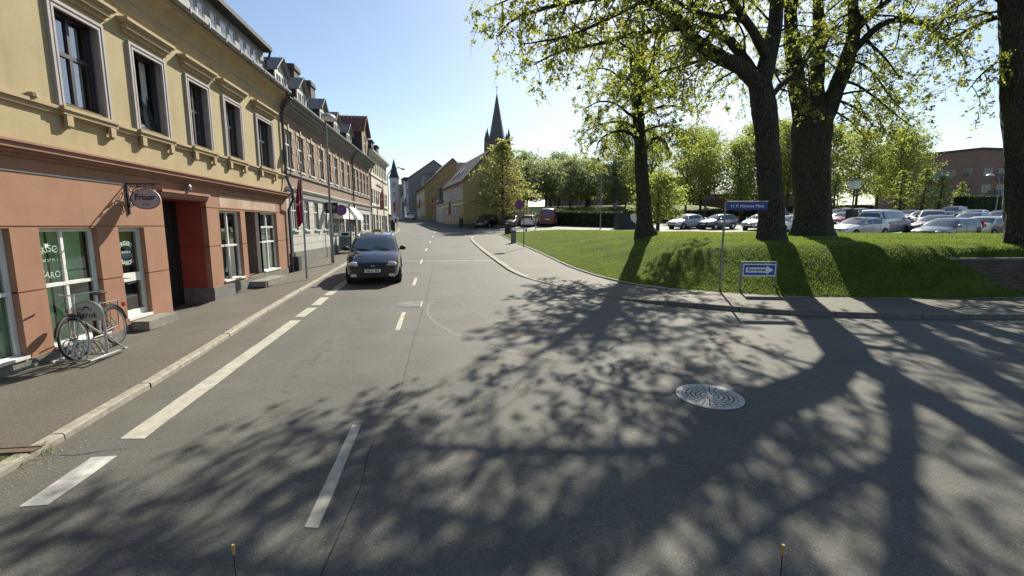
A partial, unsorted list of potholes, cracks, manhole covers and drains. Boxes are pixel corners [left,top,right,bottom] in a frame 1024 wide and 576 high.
manhole cover [674,384,747,410]
